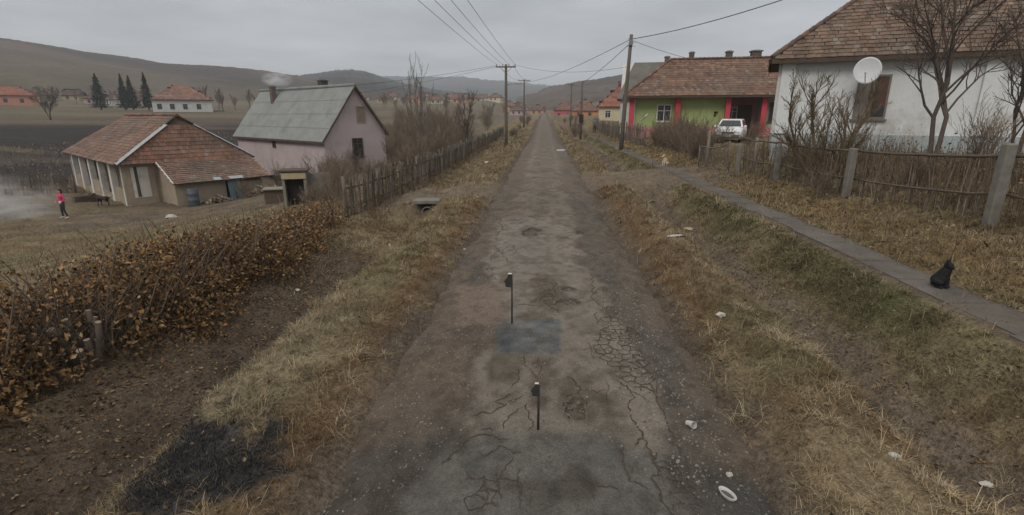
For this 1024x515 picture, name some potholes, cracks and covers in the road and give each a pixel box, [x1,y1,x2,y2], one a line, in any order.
crack [563,274,703,515]
pothole [562,394,588,423]
crack [441,354,542,511]
pothole [520,227,544,237]
crack [482,214,534,280]
